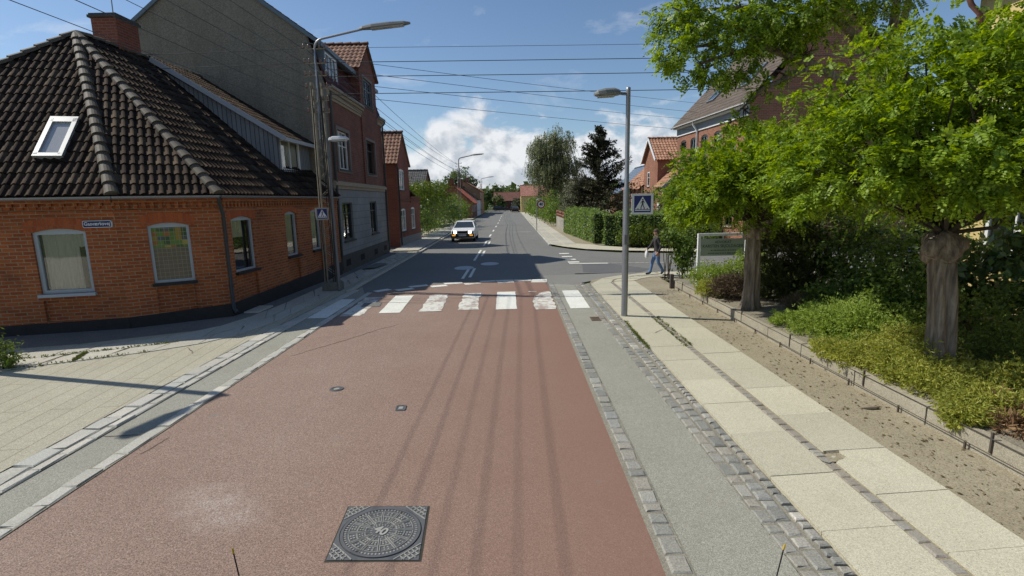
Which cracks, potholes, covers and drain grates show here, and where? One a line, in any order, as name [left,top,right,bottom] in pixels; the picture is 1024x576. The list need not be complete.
manhole cover [324,506,430,562]
